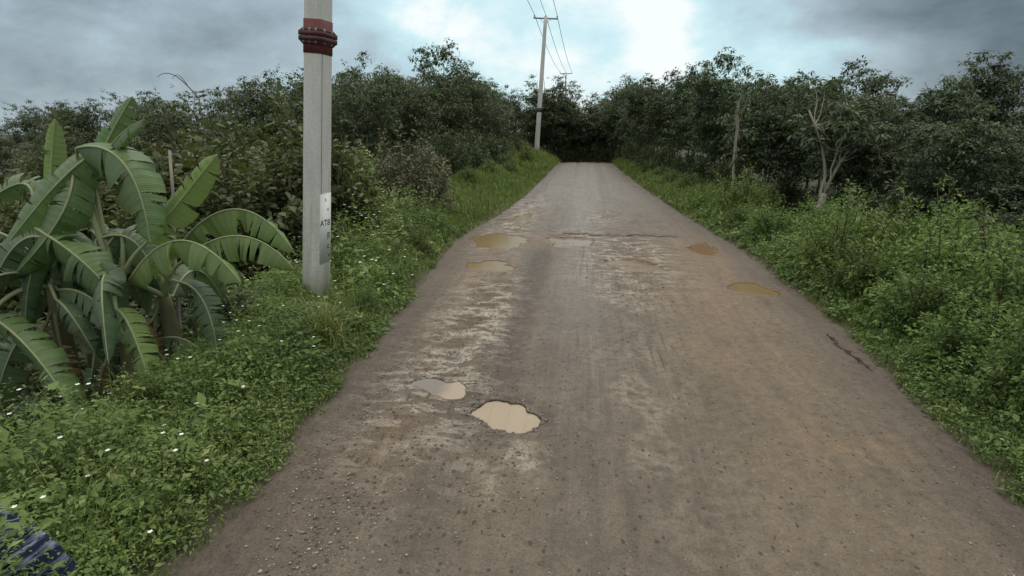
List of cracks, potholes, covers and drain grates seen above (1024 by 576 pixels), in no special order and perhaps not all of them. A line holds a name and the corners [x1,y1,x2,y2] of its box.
pothole [468,233,529,250]
pothole [686,242,719,256]
pothole [411,378,467,399]
pothole [470,399,542,433]
crack [827,334,875,372]
pothole [466,260,515,271]
pothole [727,283,780,295]
